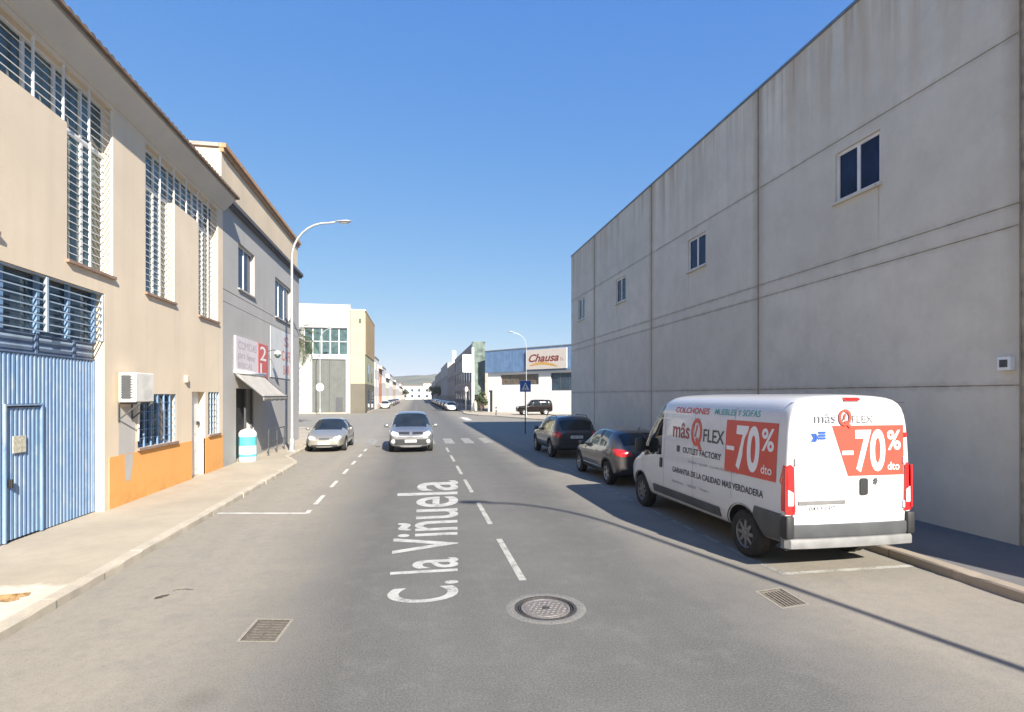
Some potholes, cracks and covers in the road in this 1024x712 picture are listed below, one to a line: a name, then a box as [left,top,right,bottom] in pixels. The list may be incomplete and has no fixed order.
drain grate [236,618,294,642]
drain grate [755,587,809,609]
manhole cover [505,593,586,625]
